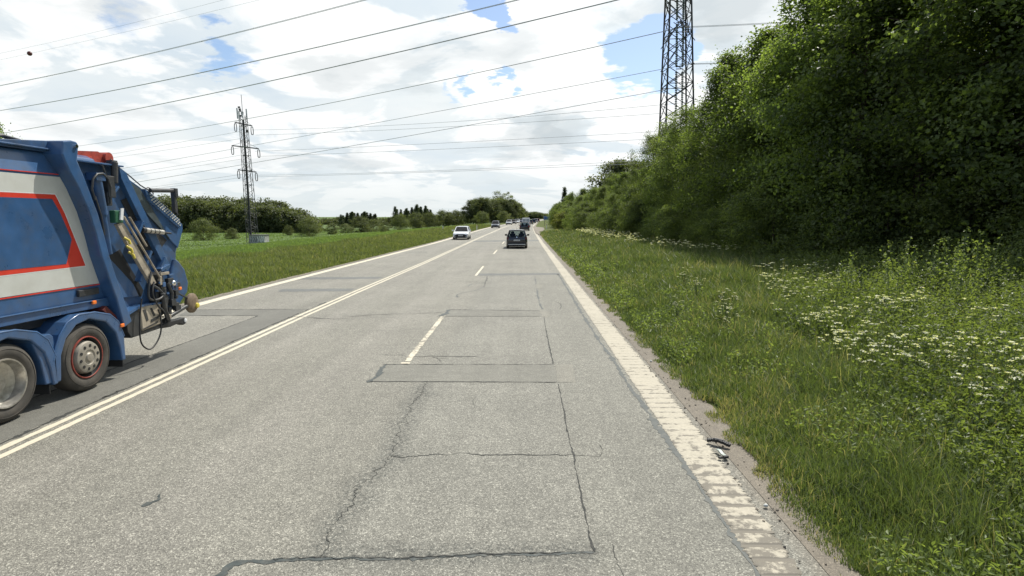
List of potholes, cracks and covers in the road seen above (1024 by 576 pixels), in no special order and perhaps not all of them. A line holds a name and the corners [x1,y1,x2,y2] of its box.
crack [273,384,608,560]
